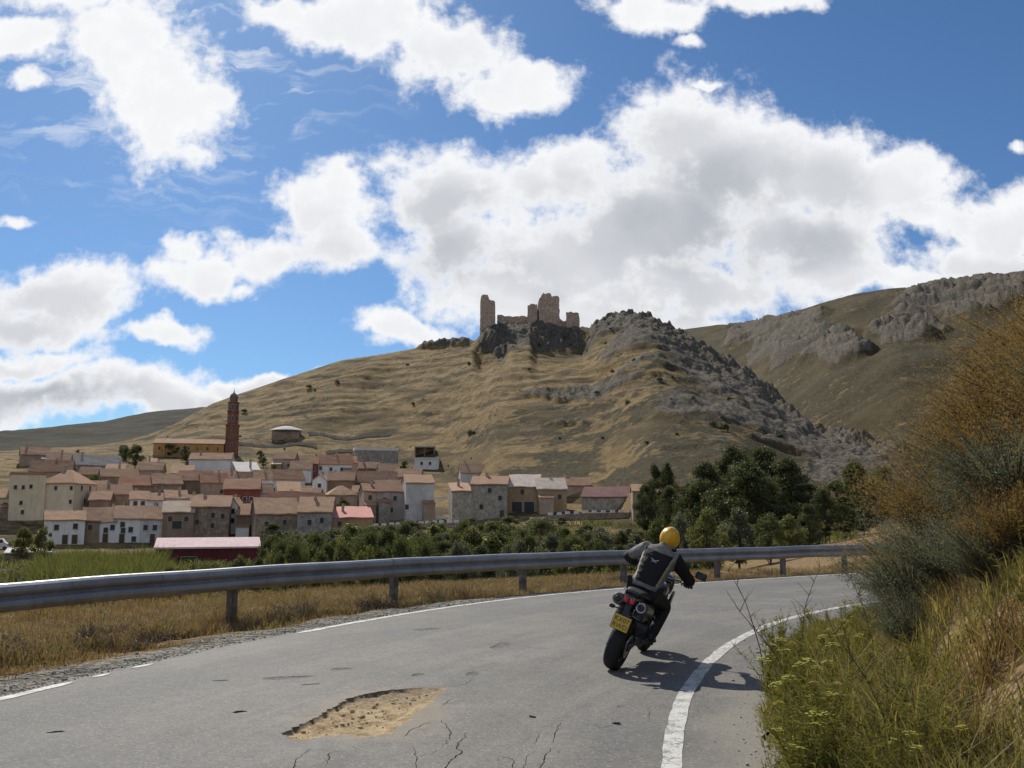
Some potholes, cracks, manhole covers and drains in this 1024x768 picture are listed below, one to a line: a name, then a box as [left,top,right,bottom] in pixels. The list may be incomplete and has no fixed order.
crack [405,680,471,768]
crack [498,722,561,768]
pothole [282,687,449,741]
